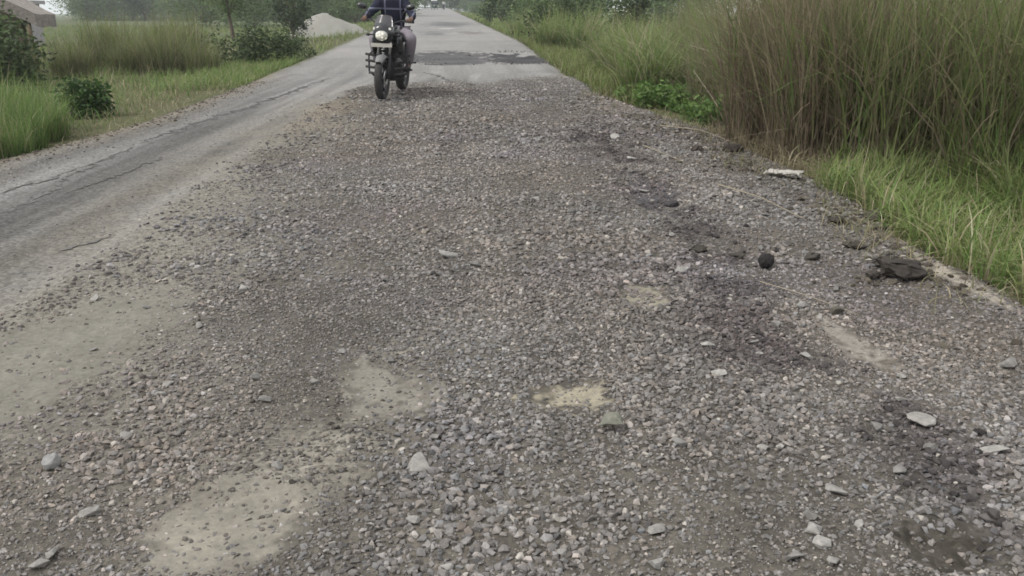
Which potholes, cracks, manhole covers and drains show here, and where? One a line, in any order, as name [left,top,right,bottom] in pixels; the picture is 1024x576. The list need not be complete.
crack [59,233,114,252]
crack [0,78,329,213]
